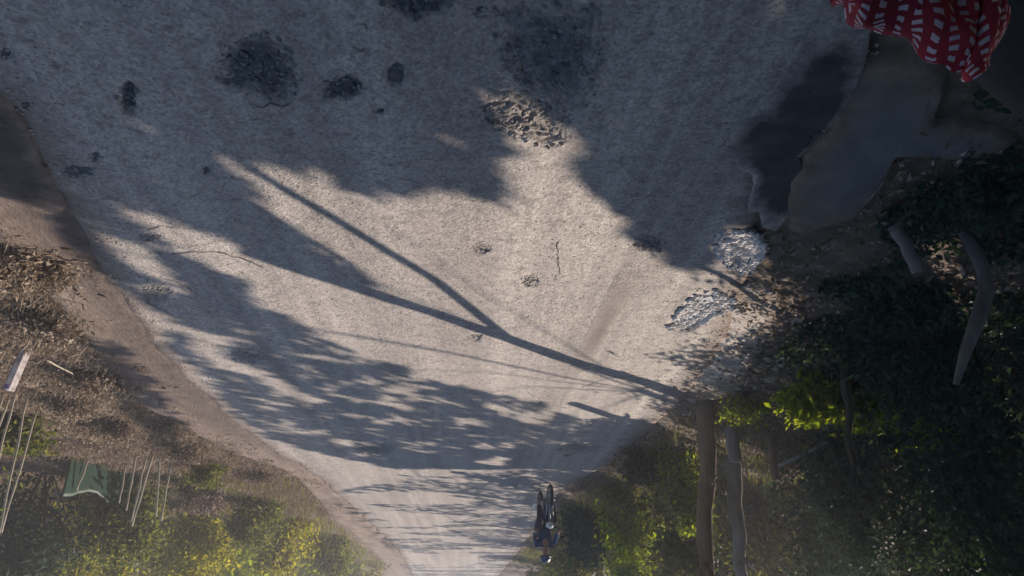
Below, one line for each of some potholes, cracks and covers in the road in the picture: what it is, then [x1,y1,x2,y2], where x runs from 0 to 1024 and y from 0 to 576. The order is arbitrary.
pothole [52,164,97,179]
pothole [114,80,140,117]
pothole [322,74,367,101]
crack [168,252,263,268]
pothole [382,61,408,88]
pothole [665,289,739,333]
pothole [470,241,494,255]
pothole [520,274,540,288]
pothole [713,229,770,276]
pothole [632,236,669,253]
pothole [212,29,303,102]
